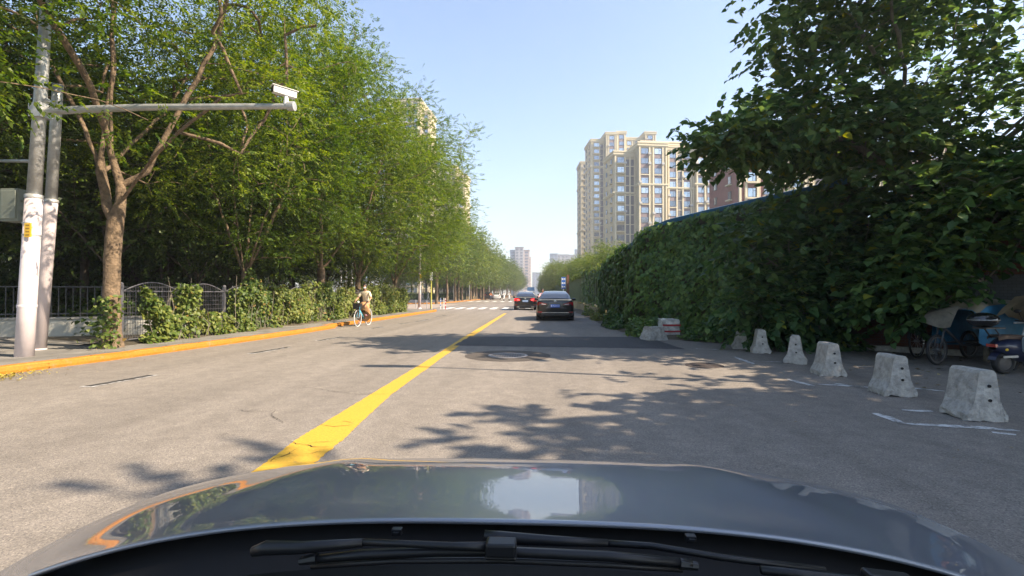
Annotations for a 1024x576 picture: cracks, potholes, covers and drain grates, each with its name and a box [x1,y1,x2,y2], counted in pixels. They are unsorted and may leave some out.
manhole cover [465,351,550,361]
